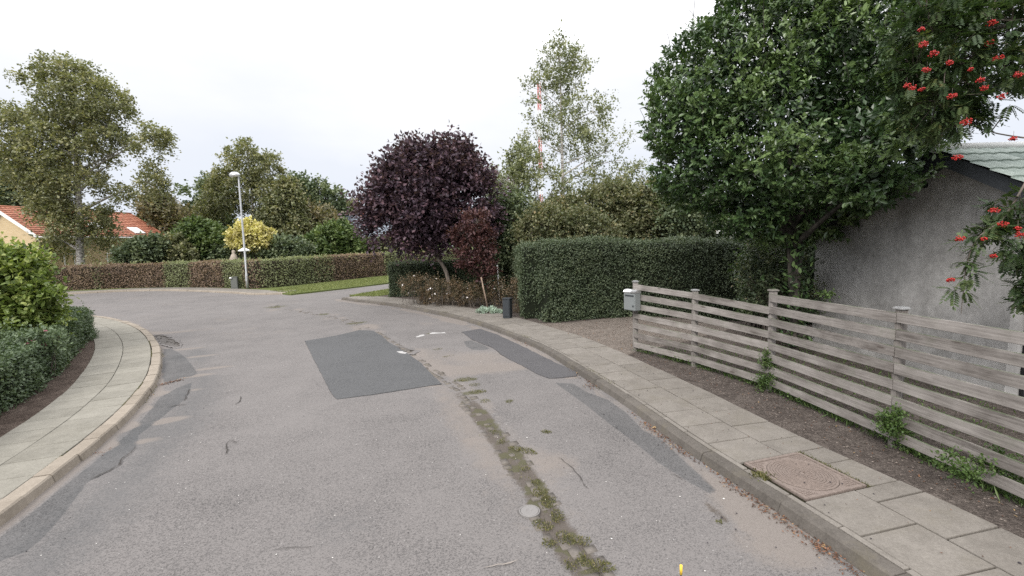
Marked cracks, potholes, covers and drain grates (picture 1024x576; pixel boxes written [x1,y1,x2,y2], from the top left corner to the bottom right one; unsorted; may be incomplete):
manhole cover [744,452,866,501]
pothole [154,334,182,349]
manhole cover [519,505,540,519]
